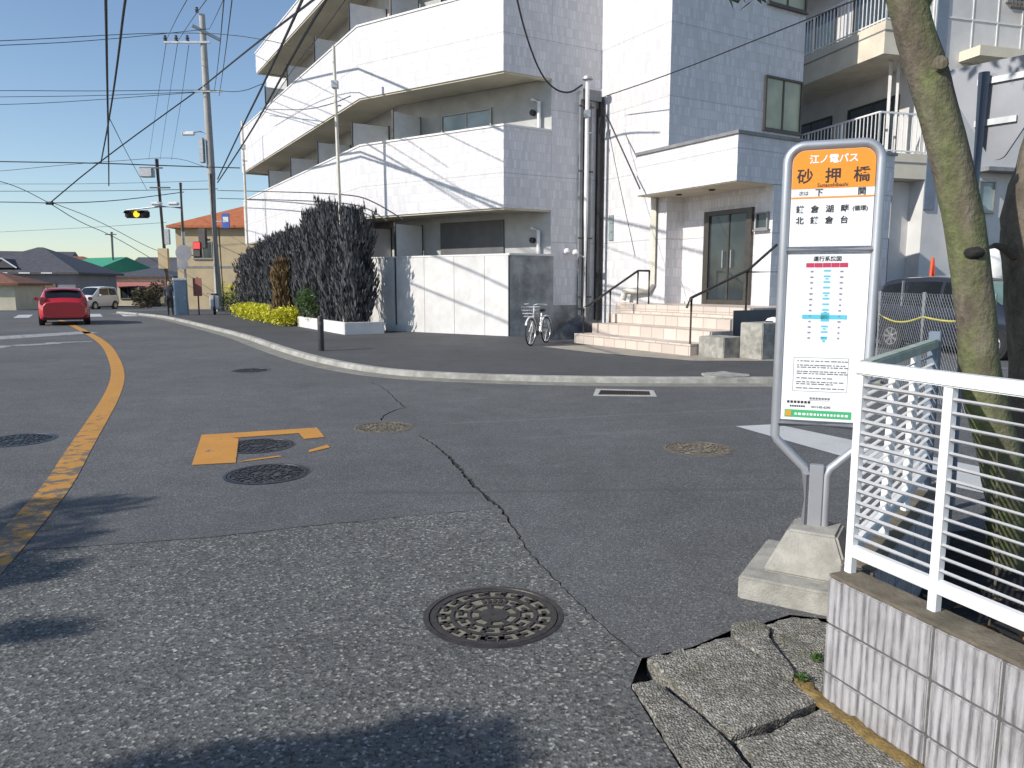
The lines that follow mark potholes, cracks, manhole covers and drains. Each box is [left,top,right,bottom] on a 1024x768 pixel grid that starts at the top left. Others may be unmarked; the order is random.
manhole cover [0,433,59,447]
manhole cover [353,422,414,433]
manhole cover [423,586,564,649]
manhole cover [663,441,736,457]
manhole cover [222,463,311,485]
drain grate [593,389,657,397]
manhole cover [237,438,296,454]
crack [371,382,407,420]
crack [24,435,640,657]
